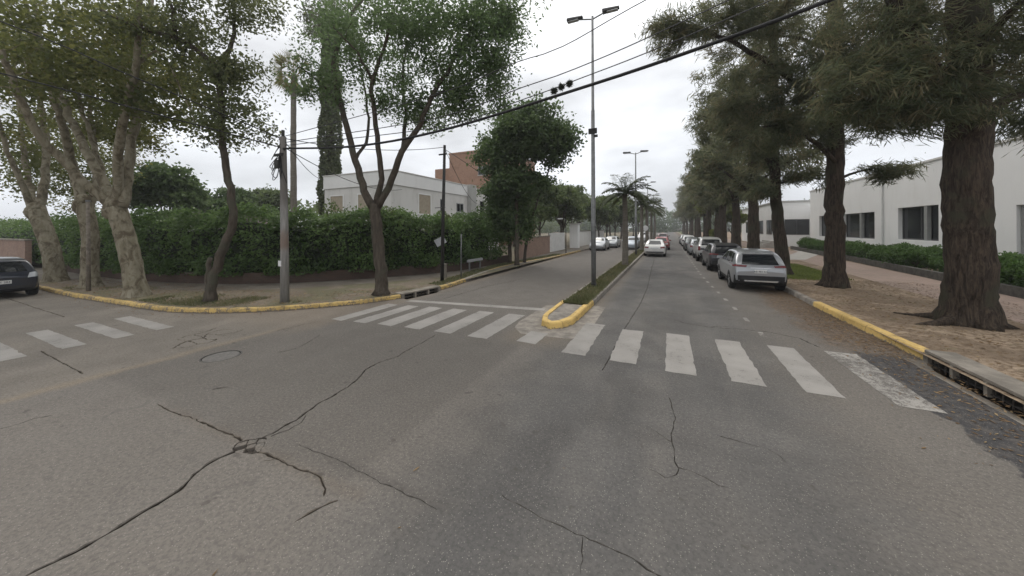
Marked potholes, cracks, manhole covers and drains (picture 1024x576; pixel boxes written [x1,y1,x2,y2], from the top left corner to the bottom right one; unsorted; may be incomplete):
drain grate [904,349,1024,425]
crack [648,398,731,489]
crack [502,495,661,576]
crack [25,335,435,576]
crack [173,328,244,348]
drain grate [394,285,443,299]
manhole cover [199,350,243,363]
